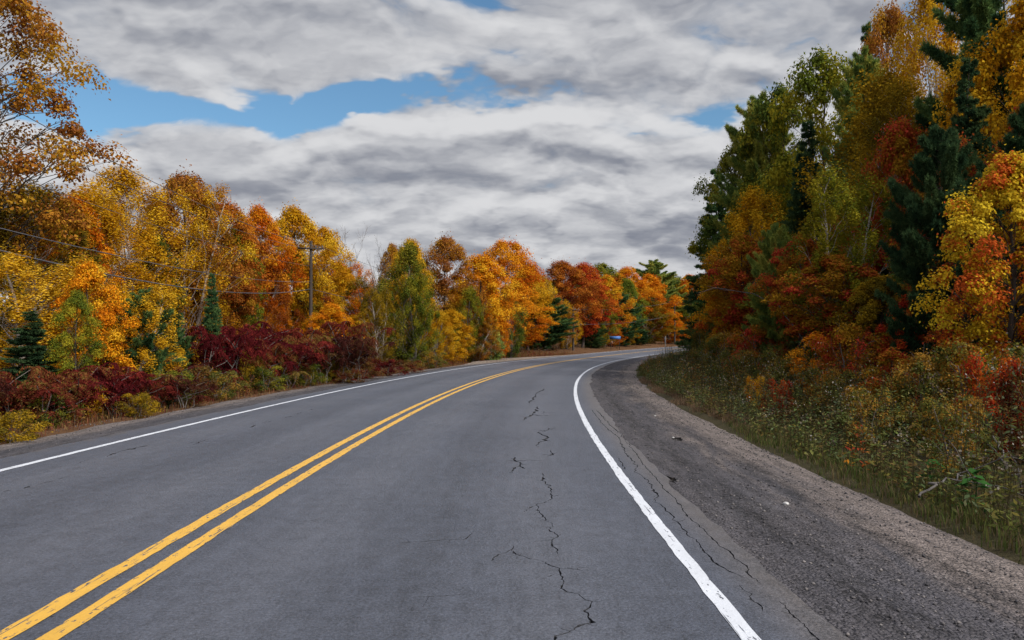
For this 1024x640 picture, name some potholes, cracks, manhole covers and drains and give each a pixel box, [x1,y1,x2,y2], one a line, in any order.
crack [488,389,602,640]
crack [592,410,820,640]
